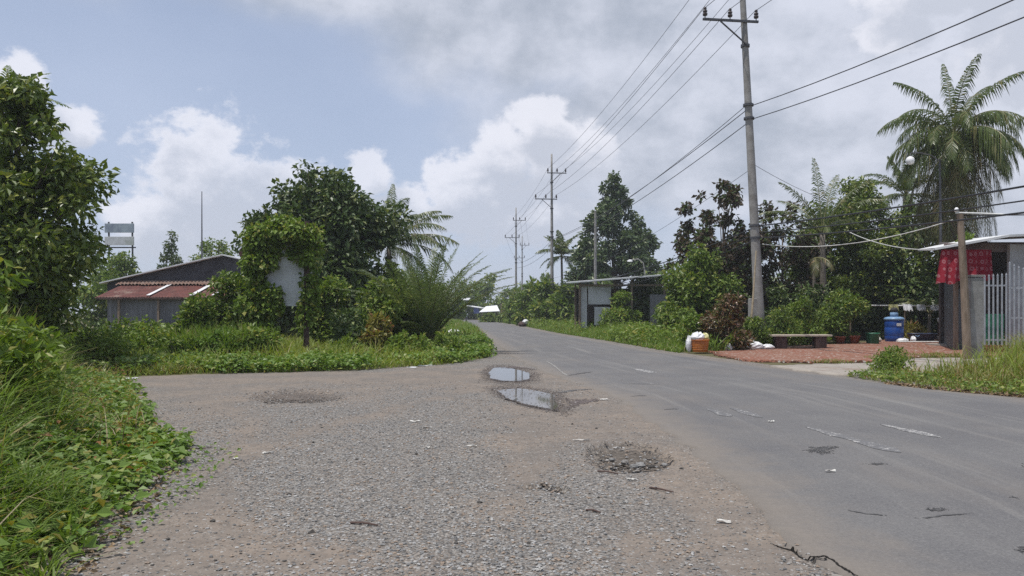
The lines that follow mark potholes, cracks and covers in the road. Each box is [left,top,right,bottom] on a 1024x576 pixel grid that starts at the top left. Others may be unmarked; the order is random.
crack [770,543,858,576]
pothole [586,442,674,472]
pothole [484,383,577,417]
pothole [250,388,336,403]
pothole [479,364,543,385]
